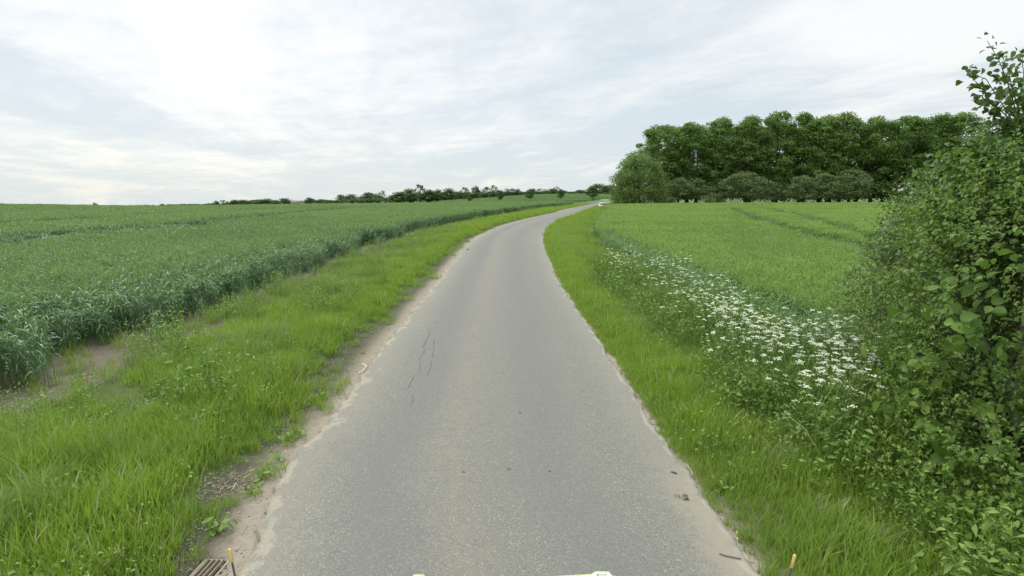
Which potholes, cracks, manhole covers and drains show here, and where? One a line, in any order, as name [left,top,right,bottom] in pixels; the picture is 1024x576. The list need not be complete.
drain grate [189,558,230,576]
